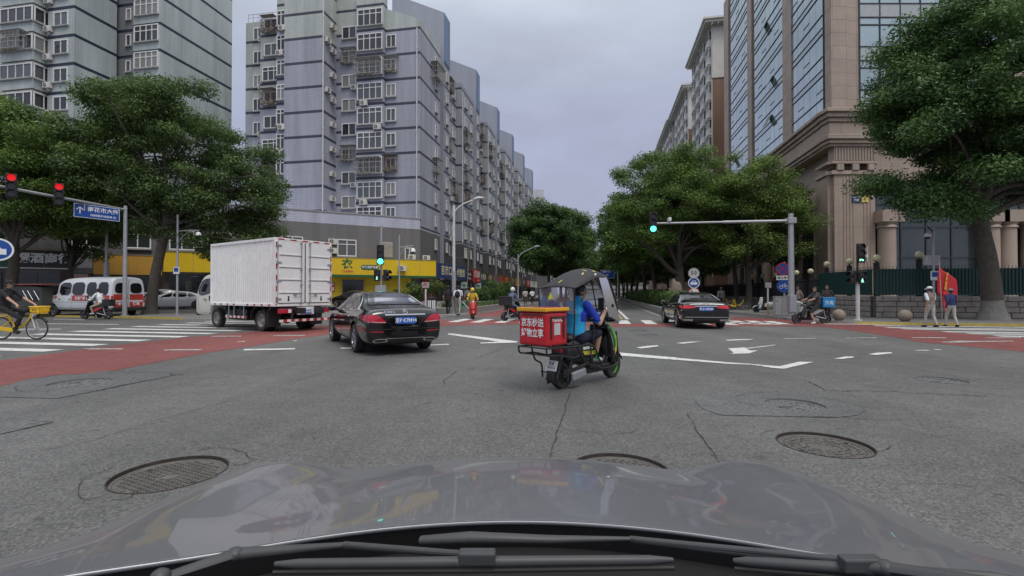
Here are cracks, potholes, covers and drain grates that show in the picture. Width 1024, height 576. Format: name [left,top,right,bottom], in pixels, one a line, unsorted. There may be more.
manhole cover [577,453,668,469]
crack [687,376,987,461]
manhole cover [775,432,878,459]
manhole cover [764,398,827,411]
manhole cover [45,378,113,388]
manhole cover [104,455,230,494]
crack [78,446,258,500]
crack [549,386,641,458]
manhole cover [914,376,971,384]
